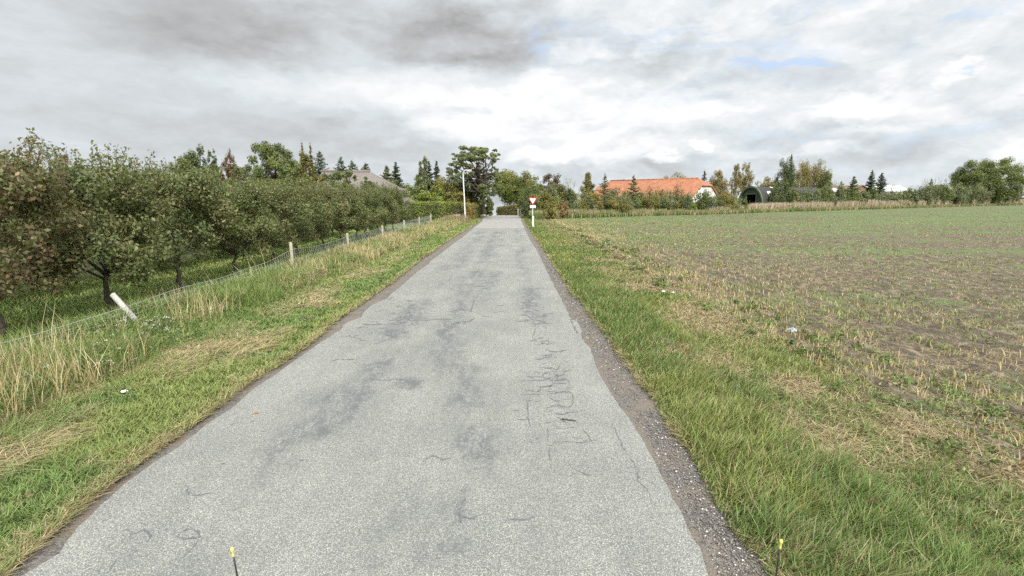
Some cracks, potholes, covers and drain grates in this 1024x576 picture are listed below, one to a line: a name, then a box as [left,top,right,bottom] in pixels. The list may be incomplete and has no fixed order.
crack [175,528,201,557]
crack [512,299,597,457]
crack [613,427,652,496]
crack [458,496,484,522]
